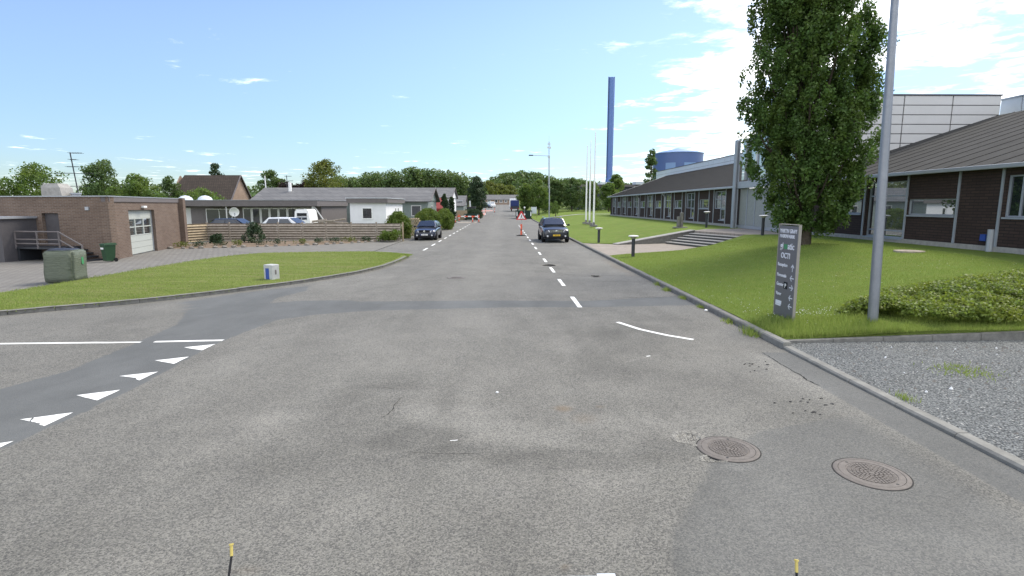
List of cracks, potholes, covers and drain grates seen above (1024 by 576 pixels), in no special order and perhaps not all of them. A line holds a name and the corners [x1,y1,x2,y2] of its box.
manhole cover [831,458,914,491]
manhole cover [696,436,762,463]
pothole [670,430,705,446]
